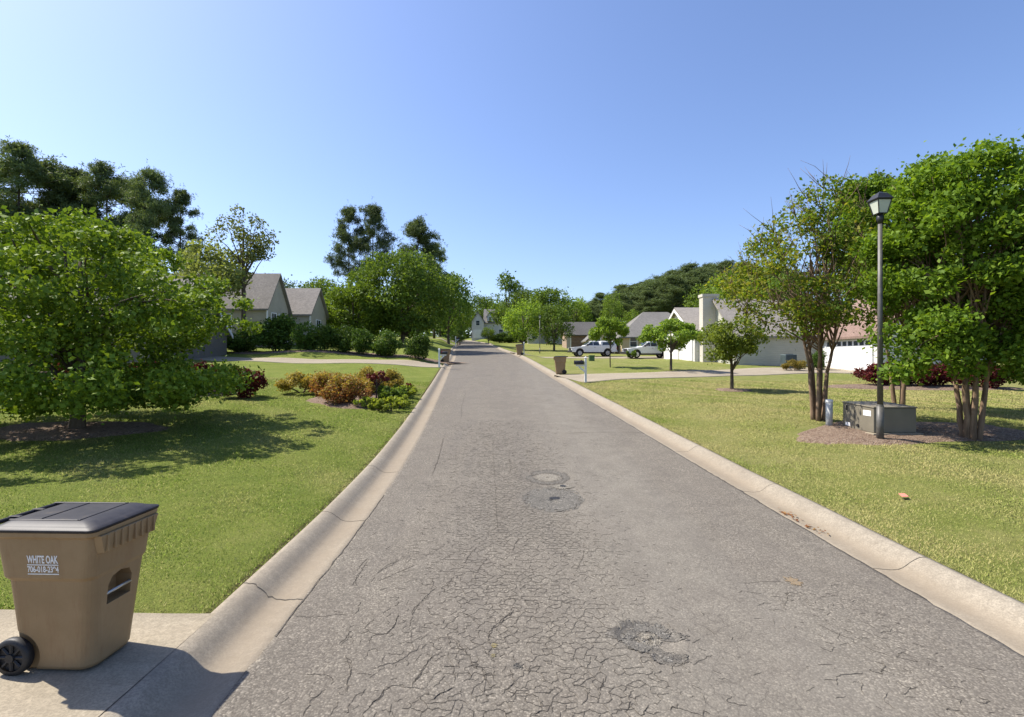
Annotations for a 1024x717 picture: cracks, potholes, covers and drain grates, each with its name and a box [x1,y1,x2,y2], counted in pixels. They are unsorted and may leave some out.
crack [283,420,1022,717]
